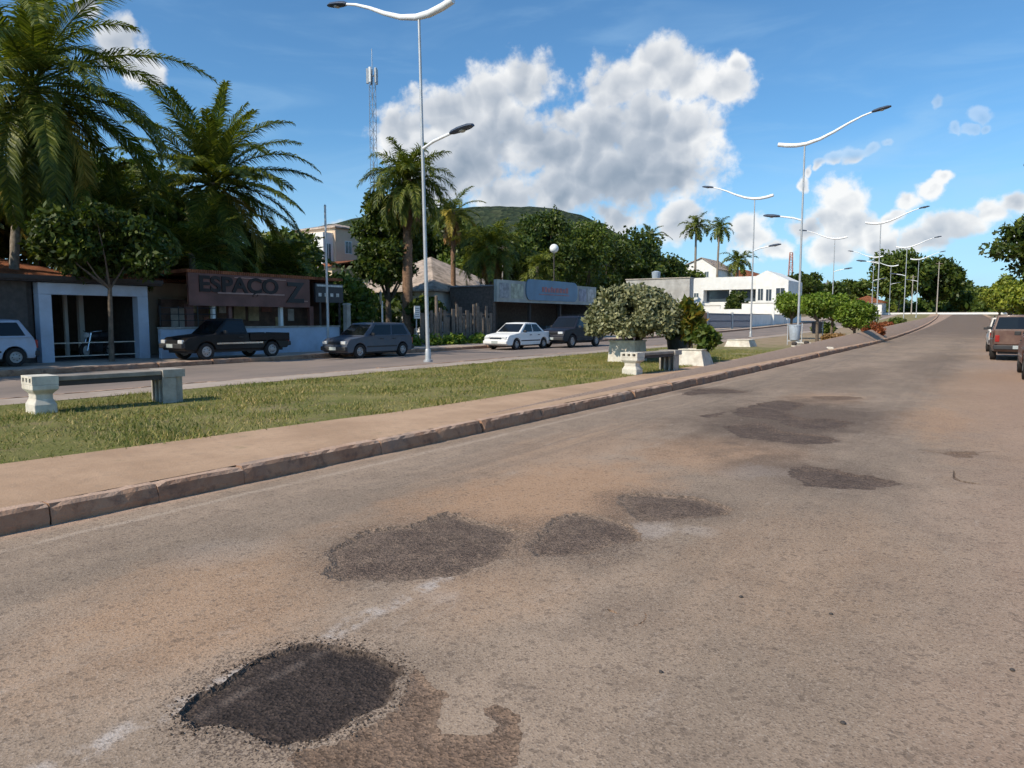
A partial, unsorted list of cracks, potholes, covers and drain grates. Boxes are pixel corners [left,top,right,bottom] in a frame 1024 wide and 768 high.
pothole [151,629,423,757]
crack [953,470,979,484]
pothole [522,513,642,557]
pothole [320,511,523,582]
